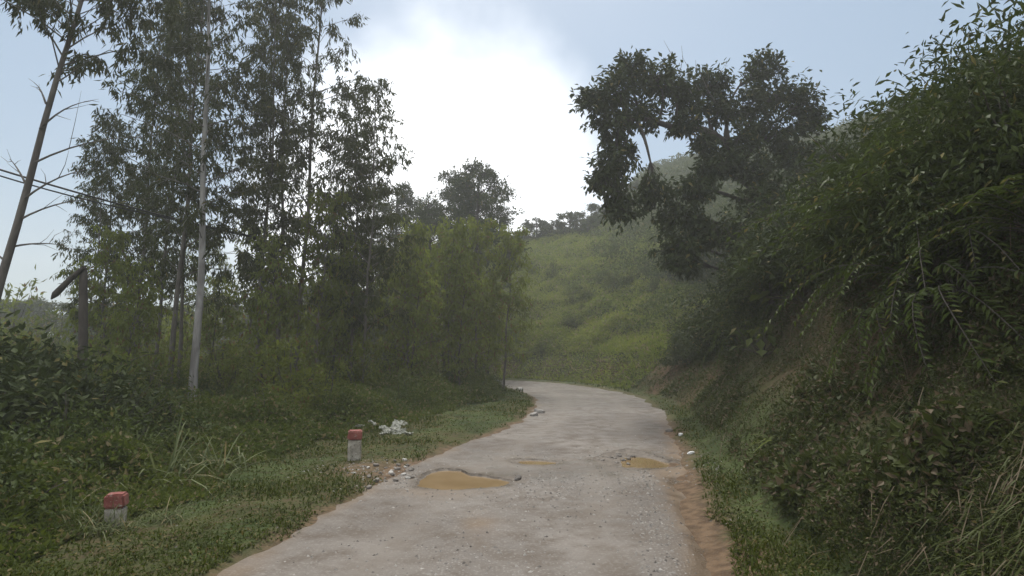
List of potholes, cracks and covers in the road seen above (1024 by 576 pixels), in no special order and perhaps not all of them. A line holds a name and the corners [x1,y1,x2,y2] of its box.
pothole [415,468,513,490]
pothole [593,448,680,468]
